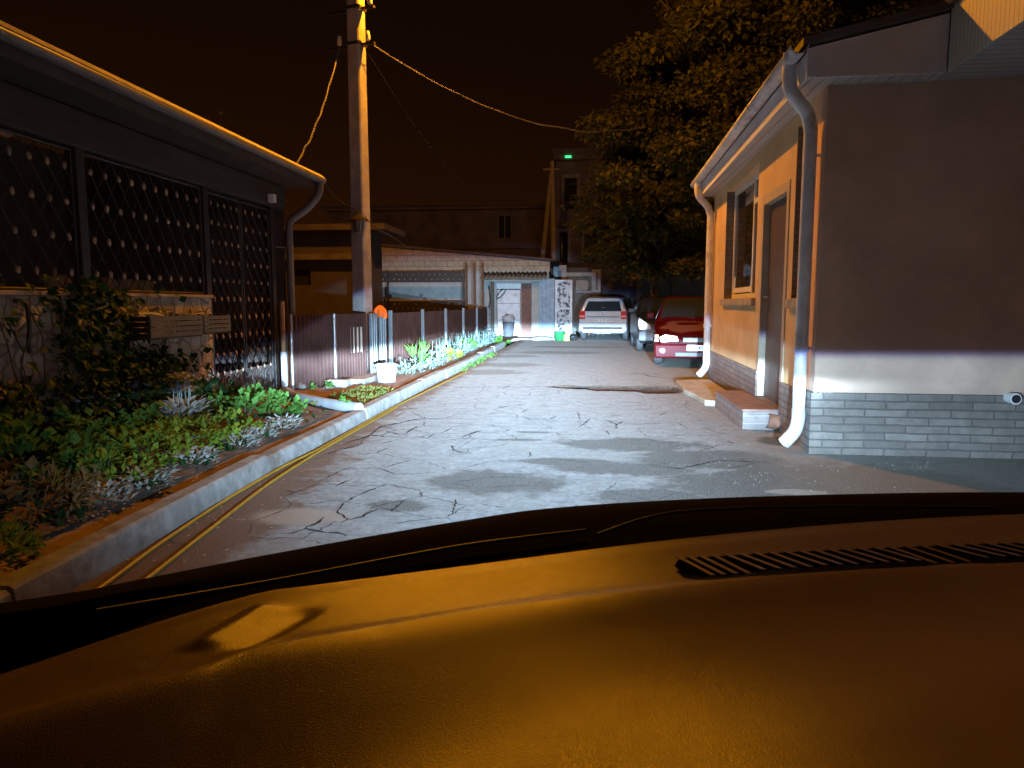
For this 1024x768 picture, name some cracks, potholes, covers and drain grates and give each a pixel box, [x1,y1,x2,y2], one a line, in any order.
crack [169,377,764,545]
